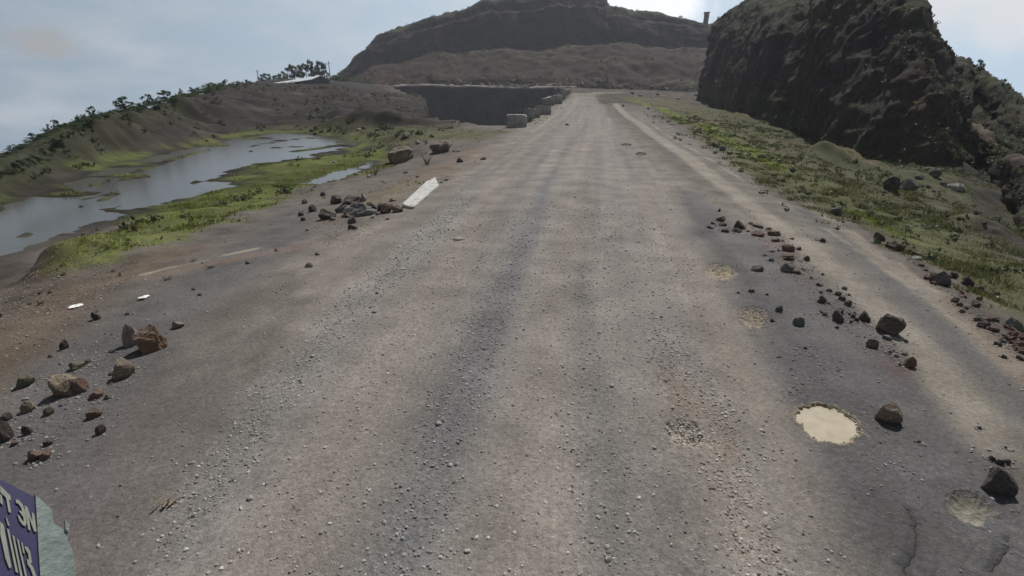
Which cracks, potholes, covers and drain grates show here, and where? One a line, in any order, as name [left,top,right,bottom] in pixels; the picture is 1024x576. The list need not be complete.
crack [962,516,1024,576]
pothole [694,257,748,289]
pothole [646,409,723,460]
crack [876,494,941,576]
pothole [777,394,879,456]
pothole [921,476,1024,555]
pothole [726,300,782,338]
